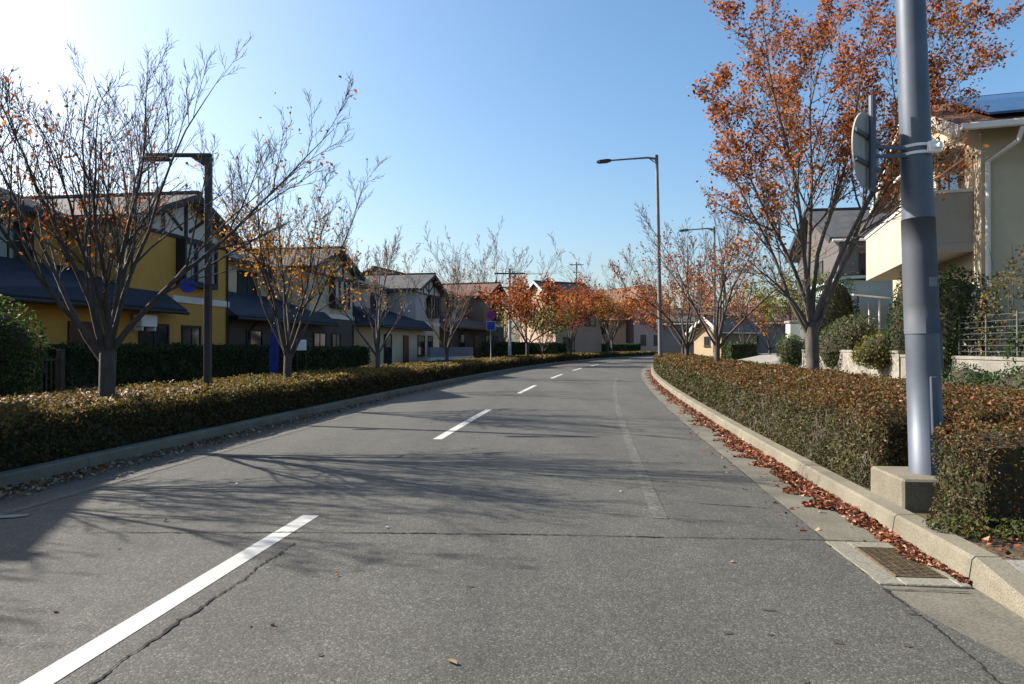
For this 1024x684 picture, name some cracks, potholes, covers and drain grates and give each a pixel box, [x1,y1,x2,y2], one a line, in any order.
drain grate [825,541,972,589]
crack [88,542,295,684]
